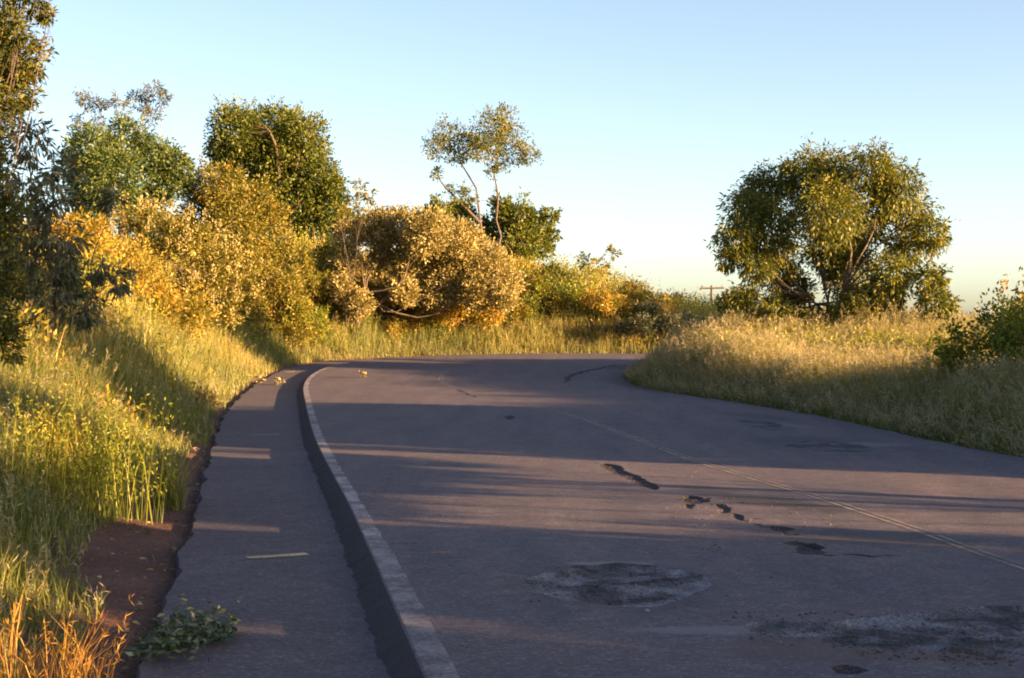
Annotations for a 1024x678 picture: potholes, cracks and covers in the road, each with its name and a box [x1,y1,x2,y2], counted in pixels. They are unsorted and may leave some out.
pothole [596,463,659,490]
pothole [742,605,1024,658]
pothole [679,495,711,509]
pothole [525,563,712,607]
pothole [831,665,869,674]
crack [563,364,618,383]
